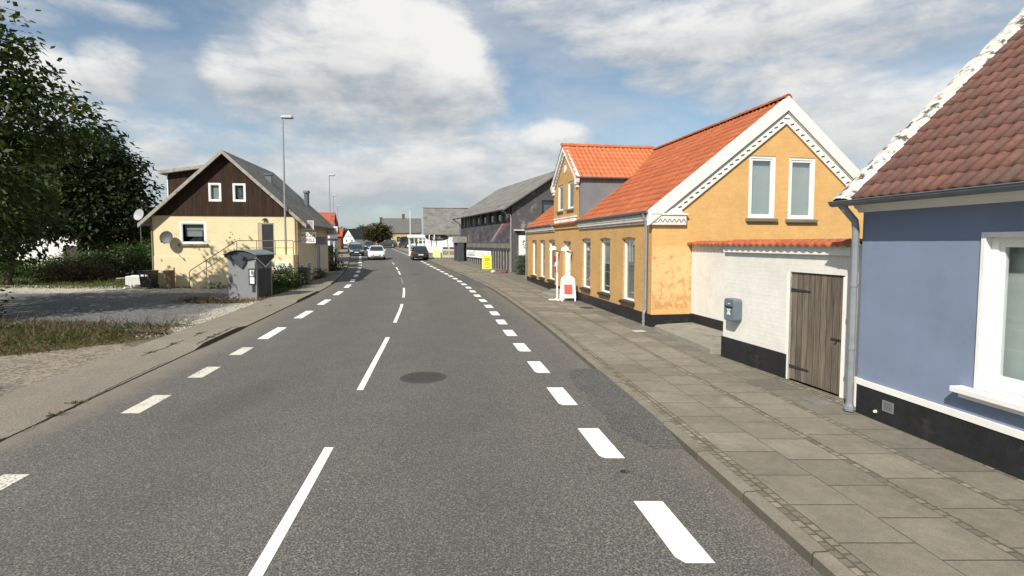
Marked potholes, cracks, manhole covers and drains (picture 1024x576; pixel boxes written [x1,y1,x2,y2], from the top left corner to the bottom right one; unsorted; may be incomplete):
manhole cover [400,372,446,383]
